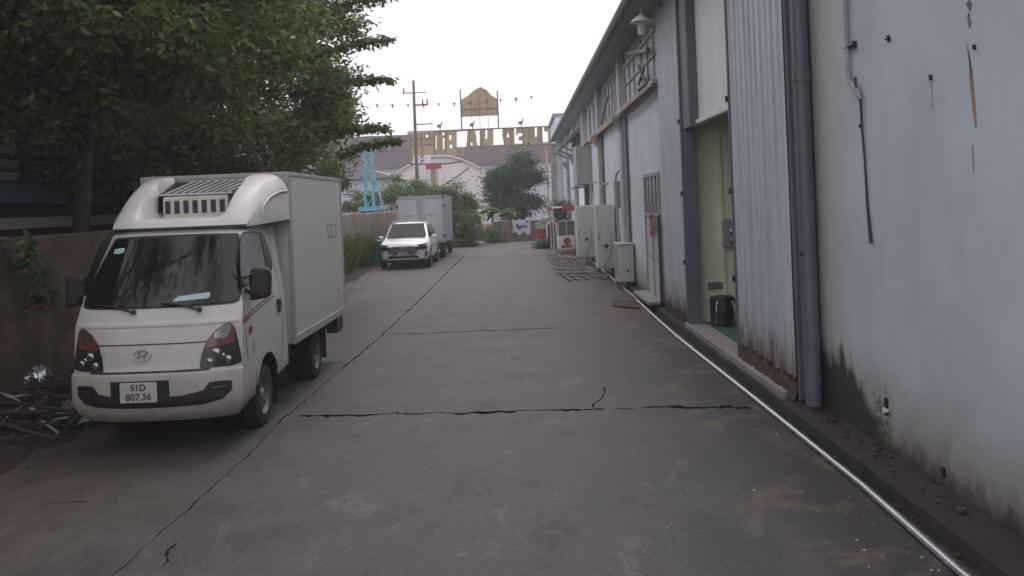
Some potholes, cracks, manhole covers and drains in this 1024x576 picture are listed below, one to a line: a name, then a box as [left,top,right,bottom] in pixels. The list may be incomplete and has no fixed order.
crack [111,256,751,576]
